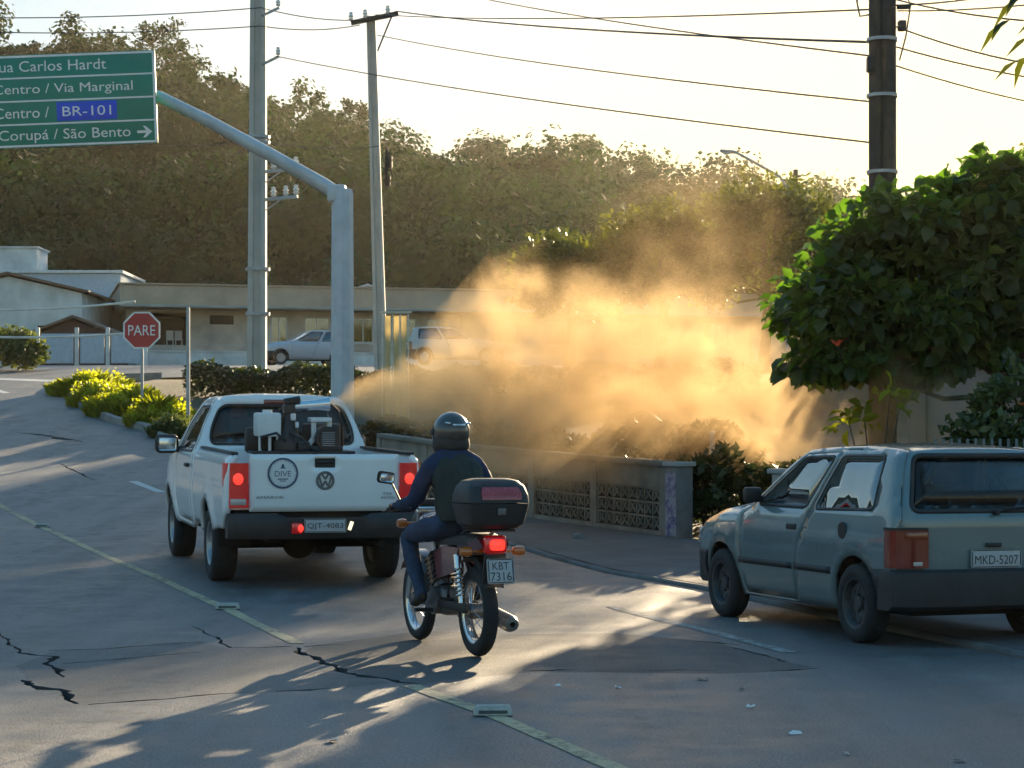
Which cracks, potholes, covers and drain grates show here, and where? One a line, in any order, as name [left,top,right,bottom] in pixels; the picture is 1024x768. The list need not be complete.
crack [0,626,421,705]
crack [17,432,83,442]
